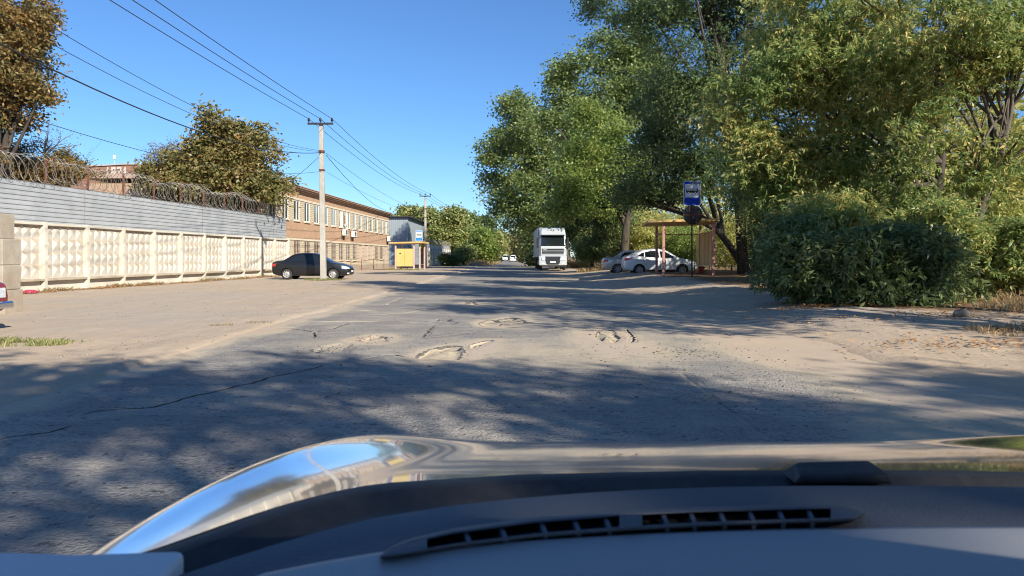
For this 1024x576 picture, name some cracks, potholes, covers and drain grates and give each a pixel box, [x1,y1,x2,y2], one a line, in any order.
crack [270,297,493,362]
pothole [305,342,359,354]
pothole [591,329,625,343]
pothole [411,345,471,361]
pothole [465,340,498,349]
pothole [358,334,395,344]
crack [0,364,329,441]
pothole [476,317,531,327]
